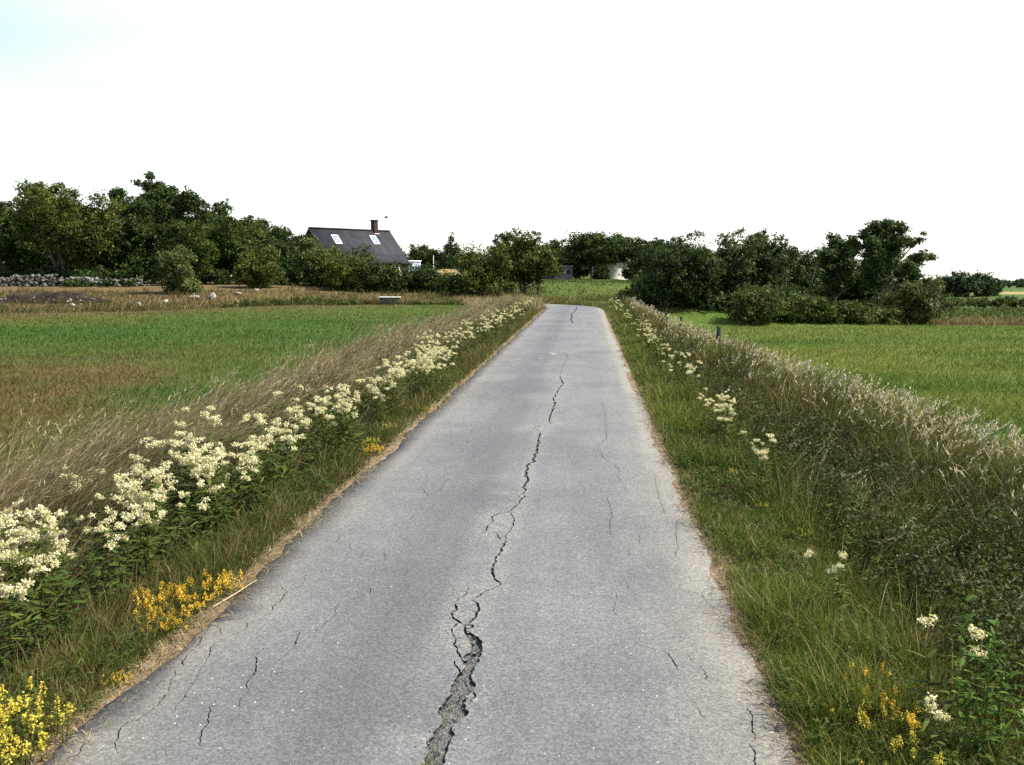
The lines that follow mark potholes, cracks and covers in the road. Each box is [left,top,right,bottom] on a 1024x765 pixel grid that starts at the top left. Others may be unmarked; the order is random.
crack [279,537,407,660]
crack [114,574,306,750]
crack [747,708,756,765]
crack [424,353,567,765]
